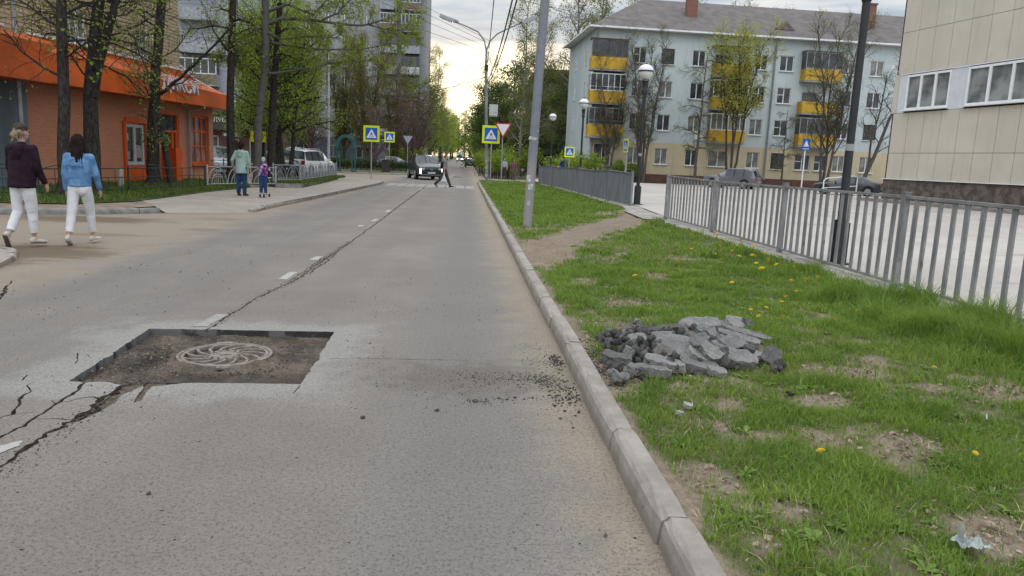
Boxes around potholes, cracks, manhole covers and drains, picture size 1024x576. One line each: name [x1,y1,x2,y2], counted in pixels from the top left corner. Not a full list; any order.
crack [0,281,12,299]
manhole cover [176,342,273,370]
crack [0,375,171,472]
pothole [70,329,334,386]
